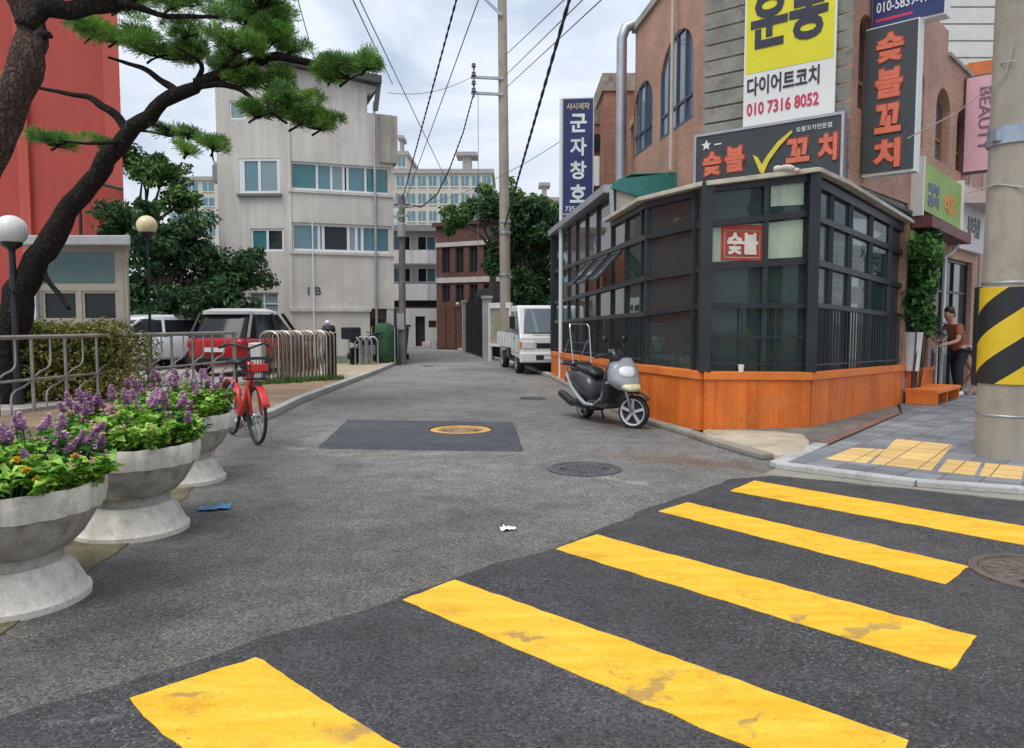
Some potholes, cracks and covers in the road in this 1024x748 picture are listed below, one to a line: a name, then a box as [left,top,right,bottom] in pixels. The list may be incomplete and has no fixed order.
manhole cover [430,425,491,434]
manhole cover [968,553,1024,589]
manhole cover [548,461,621,477]
